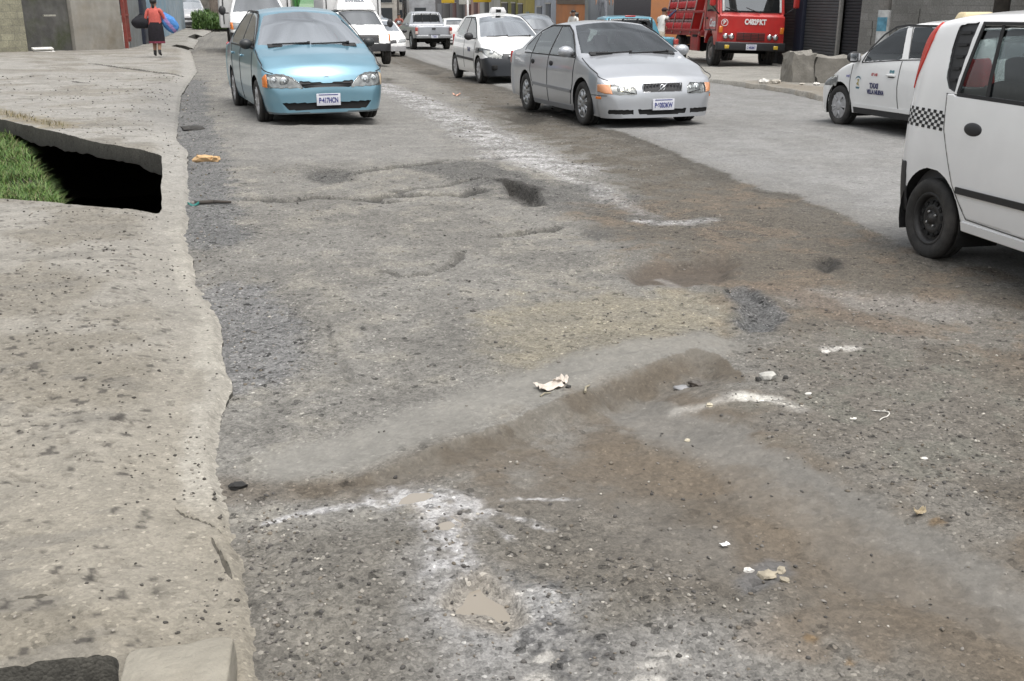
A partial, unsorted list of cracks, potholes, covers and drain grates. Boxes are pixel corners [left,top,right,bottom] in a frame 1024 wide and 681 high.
crack [486,226,565,238]
crack [175,509,233,579]
crack [243,155,520,204]
pothole [227,347,1024,679]
crack [376,251,466,278]
pothole [808,256,845,274]
pothole [300,168,357,184]
pothole [617,253,746,288]
pothole [498,178,549,208]
